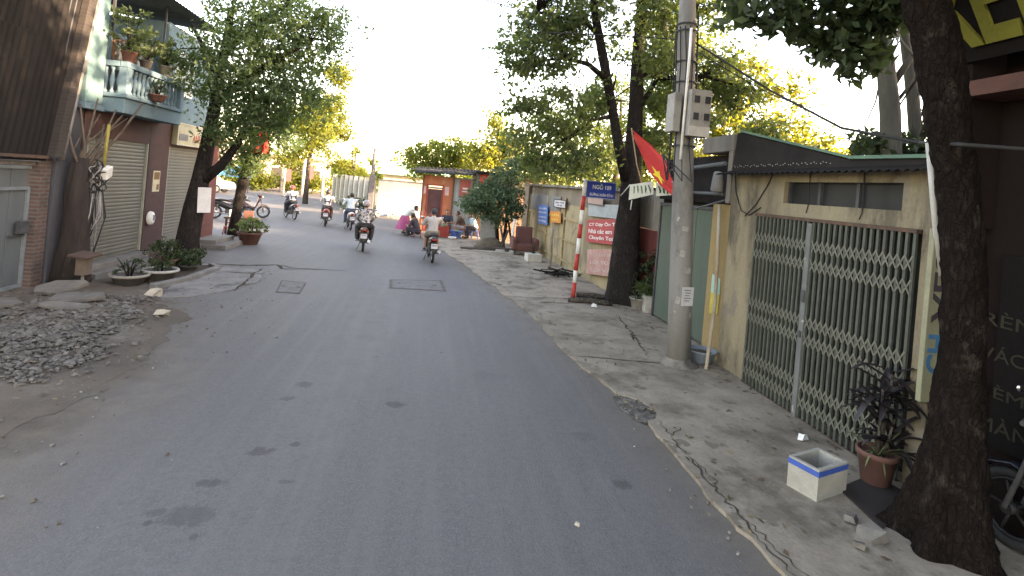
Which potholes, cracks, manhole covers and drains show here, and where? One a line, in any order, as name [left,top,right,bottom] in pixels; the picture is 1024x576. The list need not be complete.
crack [575,315,661,363]
pothole [612,394,656,424]
manhole cover [389,279,446,291]
crack [208,263,339,291]
crack [659,421,809,576]
manhole cover [276,280,306,294]
